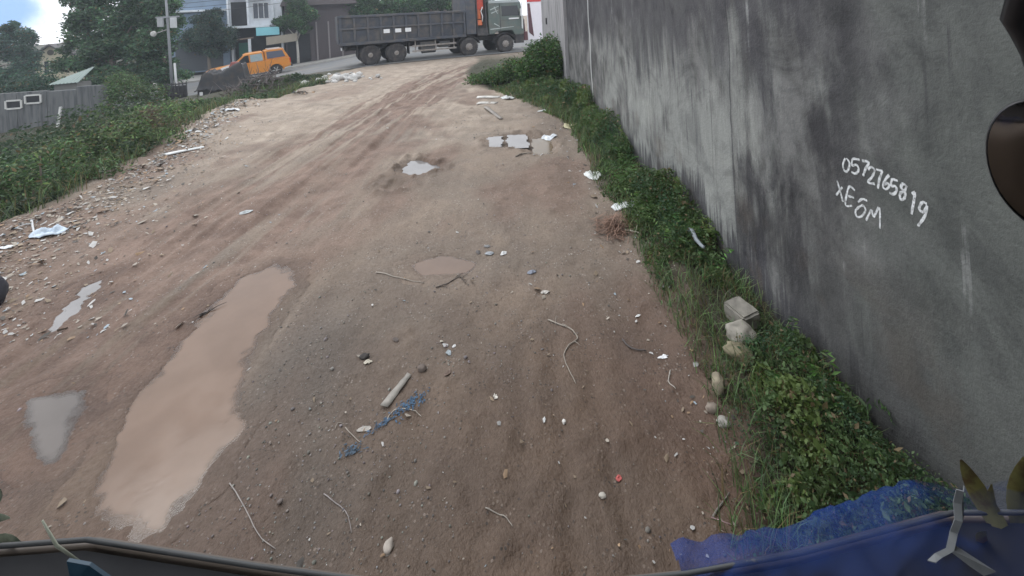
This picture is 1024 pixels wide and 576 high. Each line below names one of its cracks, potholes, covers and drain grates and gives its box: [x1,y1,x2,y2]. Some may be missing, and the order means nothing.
pothole [478,130,563,156]
pothole [392,152,448,180]
pothole [28,271,114,346]
pothole [0,374,112,488]
pothole [392,248,489,288]
pothole [41,256,315,547]
